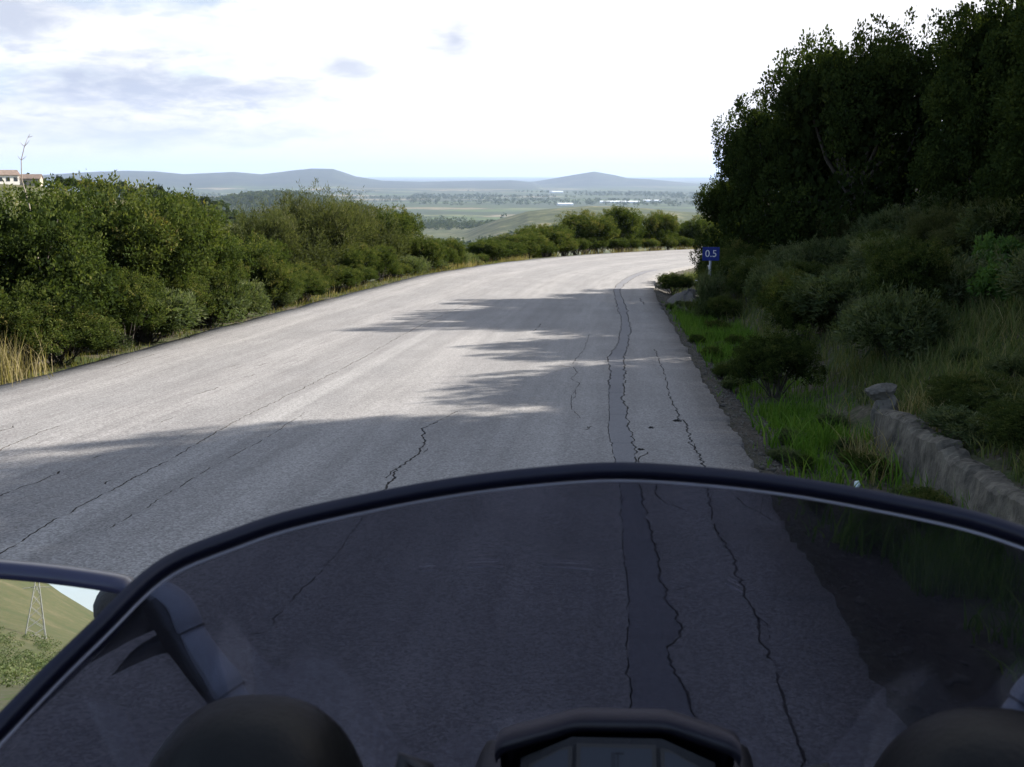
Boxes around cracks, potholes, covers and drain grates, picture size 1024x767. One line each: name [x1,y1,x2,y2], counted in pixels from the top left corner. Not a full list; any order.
crack [654,350,806,767]
crack [566,336,590,430]
crack [607,272,697,719]
crack [255,411,458,634]
